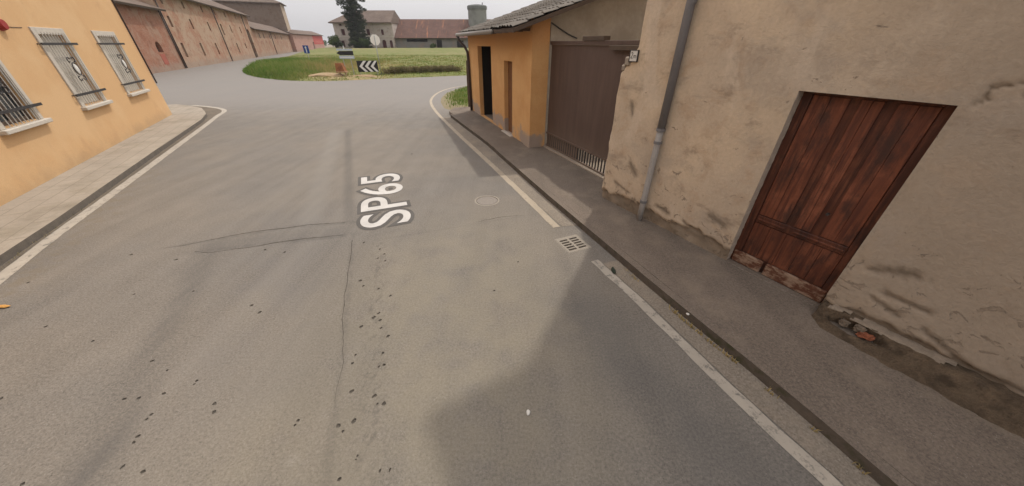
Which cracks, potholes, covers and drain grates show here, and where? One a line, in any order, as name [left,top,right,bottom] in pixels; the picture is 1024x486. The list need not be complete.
crack [169,222,352,396]
manhole cover [475,195,499,206]
drain grate [554,234,592,254]
